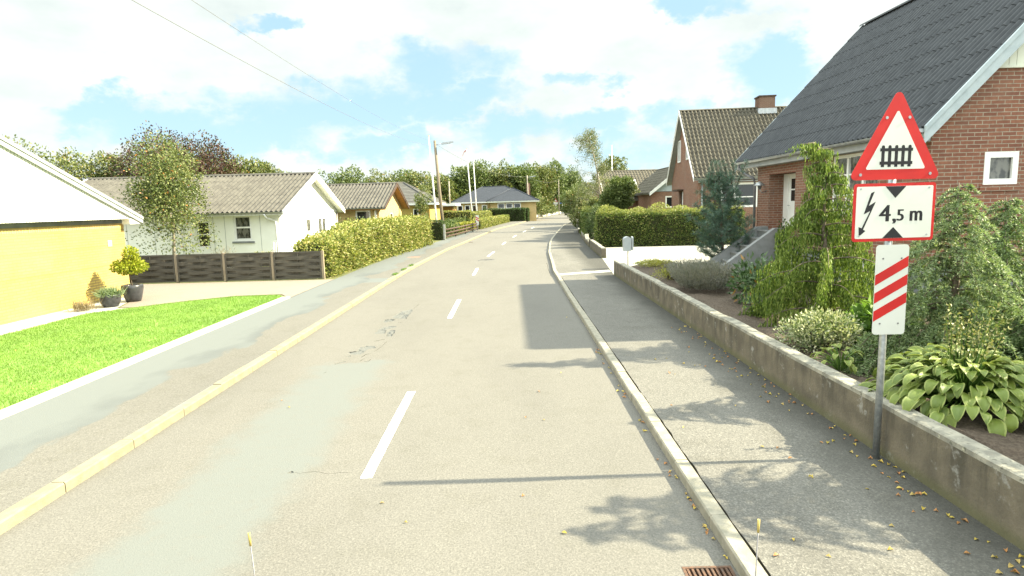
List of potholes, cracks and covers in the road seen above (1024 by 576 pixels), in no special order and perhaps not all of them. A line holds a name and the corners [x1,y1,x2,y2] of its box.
drain grate [681,565,736,576]
